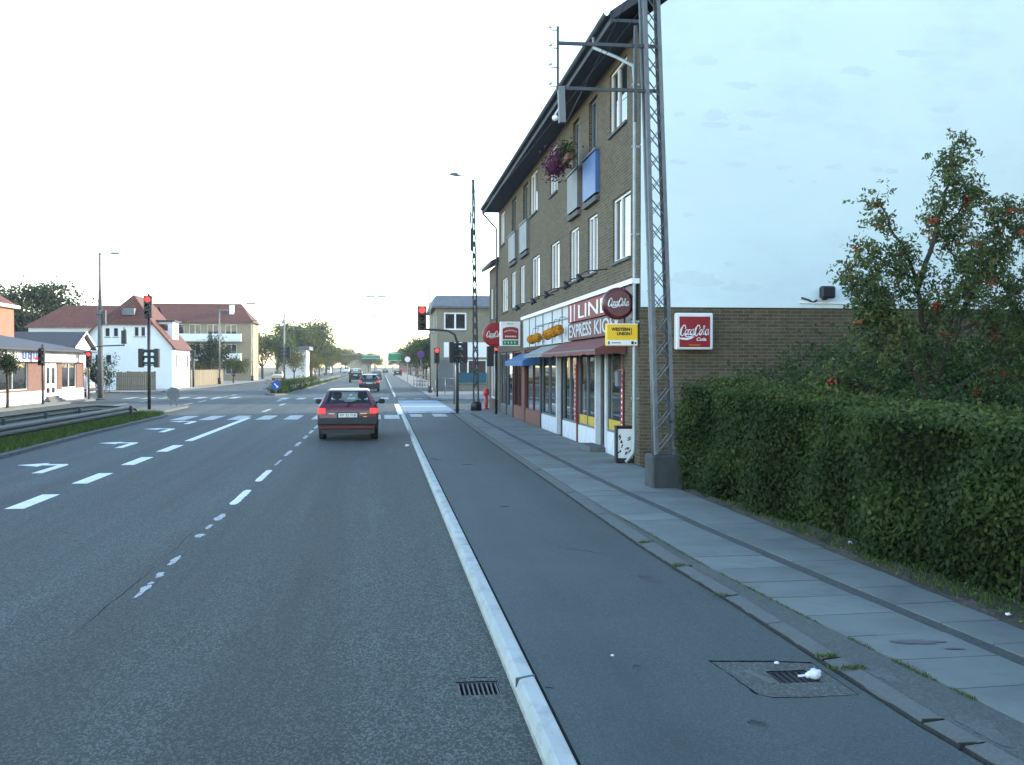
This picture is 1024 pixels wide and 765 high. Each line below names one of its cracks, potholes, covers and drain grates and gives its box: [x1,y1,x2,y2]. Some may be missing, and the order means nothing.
crack [77,570,150,632]
drain grate [766,670,820,683]
drain grate [456,681,502,696]
